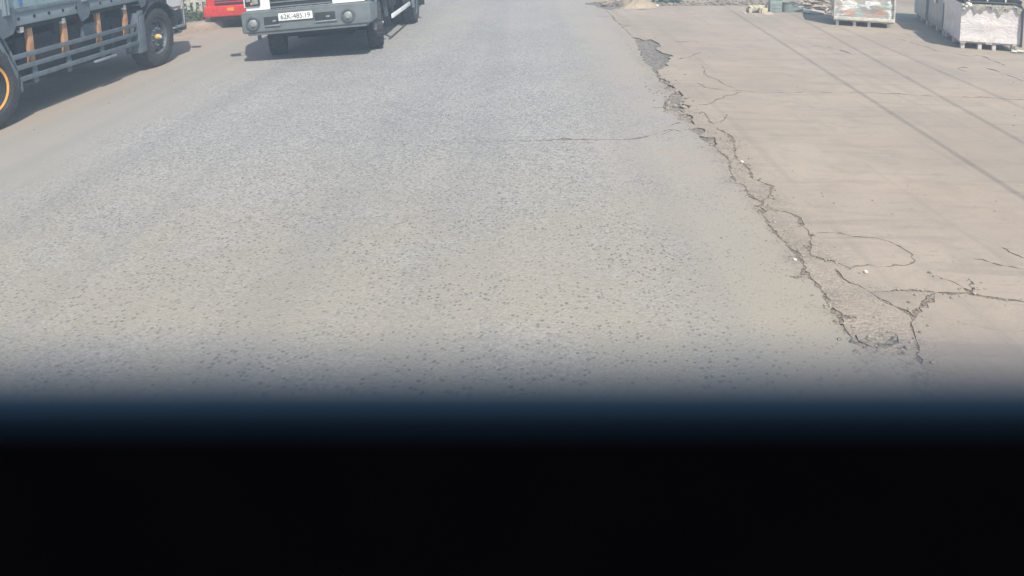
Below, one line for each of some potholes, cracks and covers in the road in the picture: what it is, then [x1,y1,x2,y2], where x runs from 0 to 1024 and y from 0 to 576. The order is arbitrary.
pothole [634,37,673,74]
crack [677,41,1024,363]
crack [443,106,686,143]
